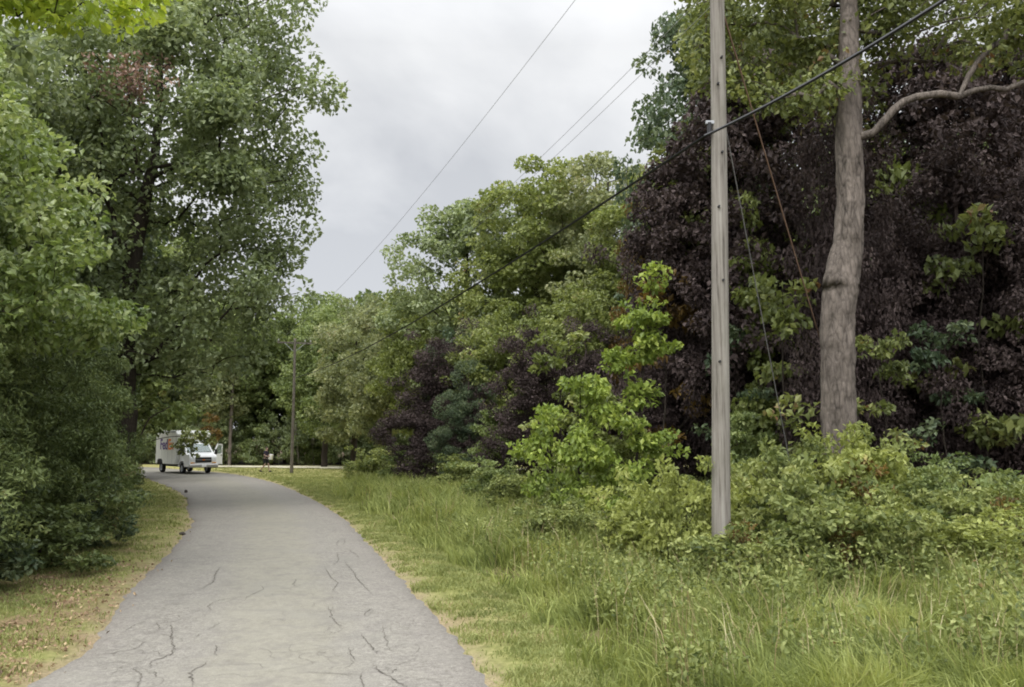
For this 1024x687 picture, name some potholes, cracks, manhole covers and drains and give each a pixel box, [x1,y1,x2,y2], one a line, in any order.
crack [83,539,441,687]
